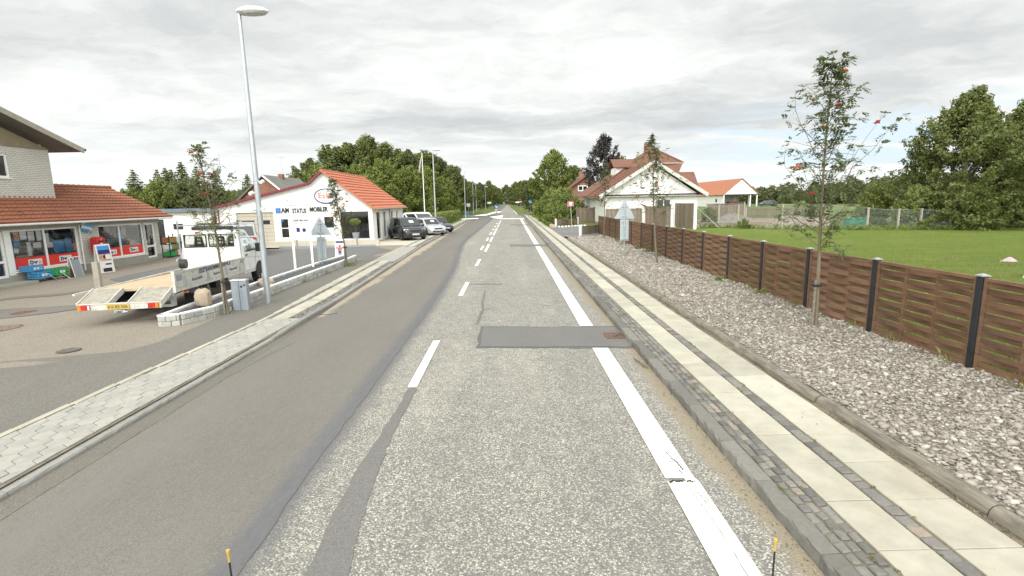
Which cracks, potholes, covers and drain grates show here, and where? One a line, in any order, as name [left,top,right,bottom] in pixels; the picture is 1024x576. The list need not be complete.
crack [476,290,495,325]
crack [660,452,748,575]
